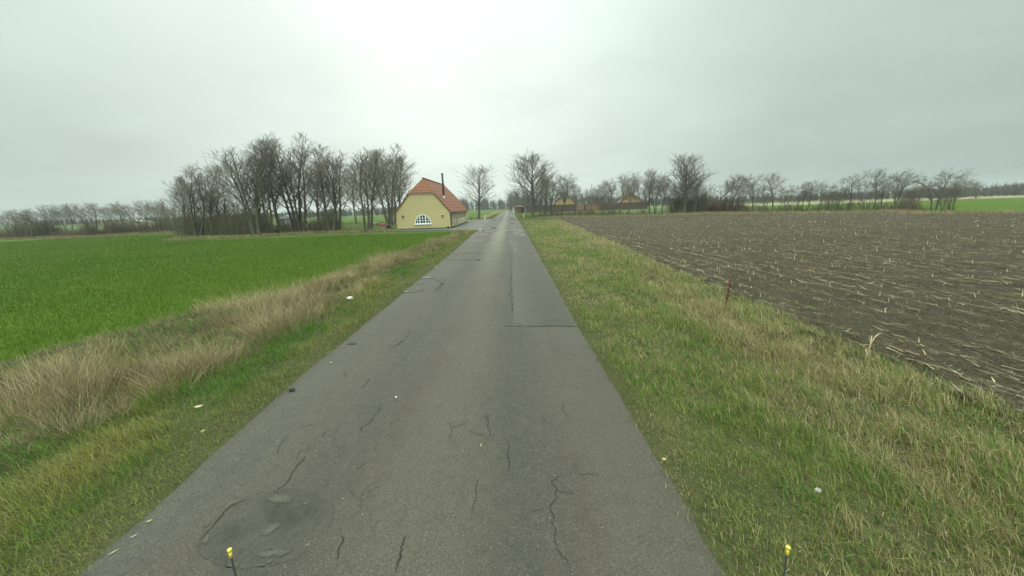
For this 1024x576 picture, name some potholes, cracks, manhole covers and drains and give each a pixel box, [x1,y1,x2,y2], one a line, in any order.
crack [528,473,600,570]
